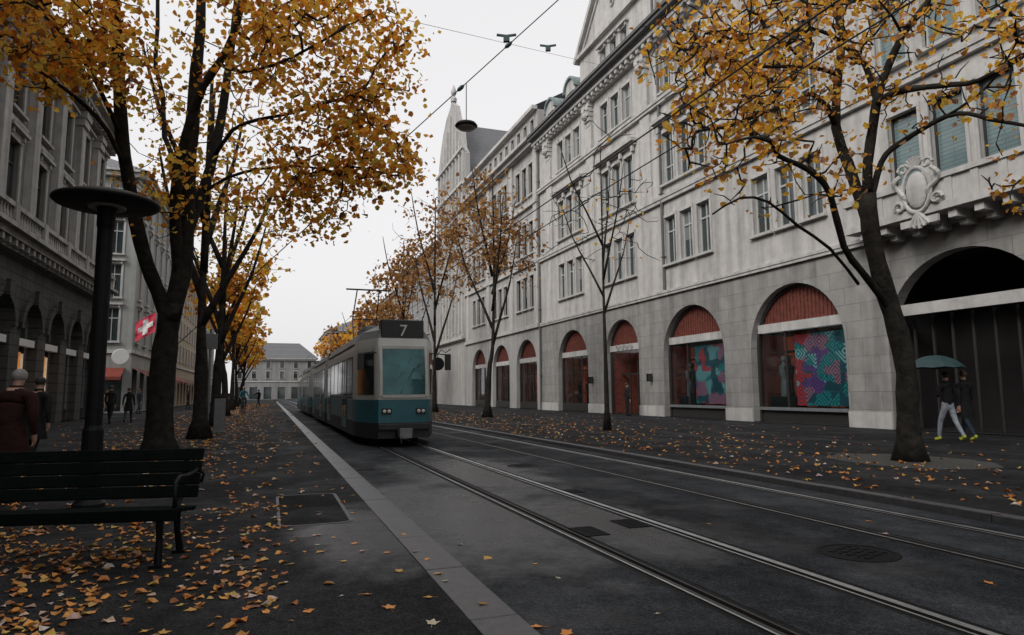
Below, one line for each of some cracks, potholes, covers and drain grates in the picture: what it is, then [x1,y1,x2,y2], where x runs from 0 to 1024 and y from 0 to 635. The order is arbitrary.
manhole cover [815,544,902,563]
